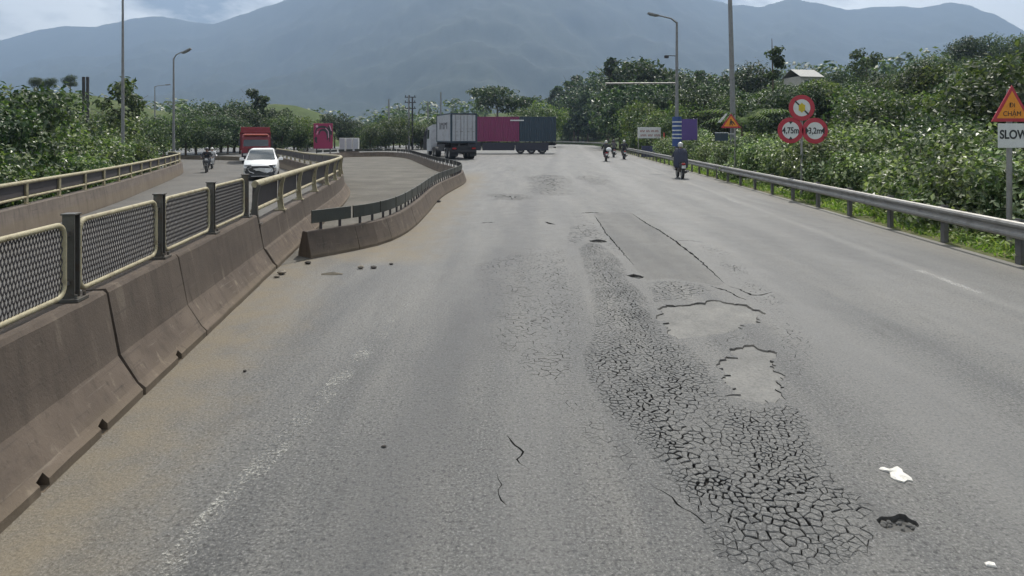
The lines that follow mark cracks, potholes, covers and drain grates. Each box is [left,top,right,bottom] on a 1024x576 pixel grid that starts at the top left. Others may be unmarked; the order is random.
pothole [656,300,766,339]
pothole [876,514,919,533]
crack [578,247,873,572]
crack [497,437,524,504]
pothole [716,344,786,404]
crack [633,214,811,398]
crack [476,212,633,413]
